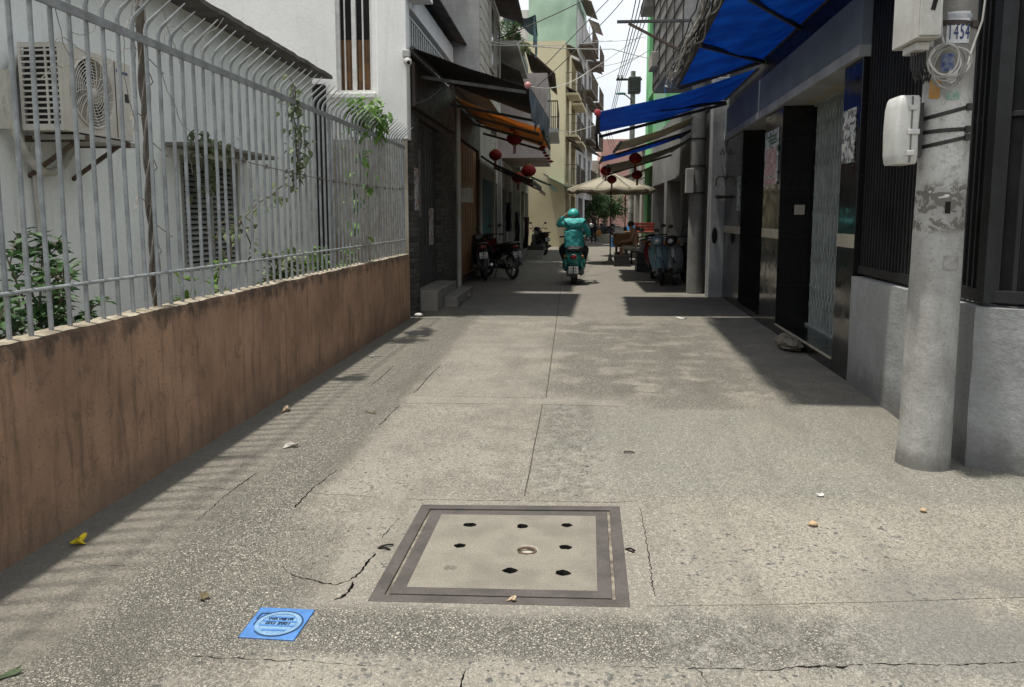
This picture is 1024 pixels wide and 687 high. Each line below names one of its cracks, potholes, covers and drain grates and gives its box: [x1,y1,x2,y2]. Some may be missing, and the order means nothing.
crack [294,470,372,508]
crack [187,655,387,666]
manhole cover [368,505,630,607]
crack [407,498,656,596]
crack [615,661,1018,684]
crack [283,517,401,600]
